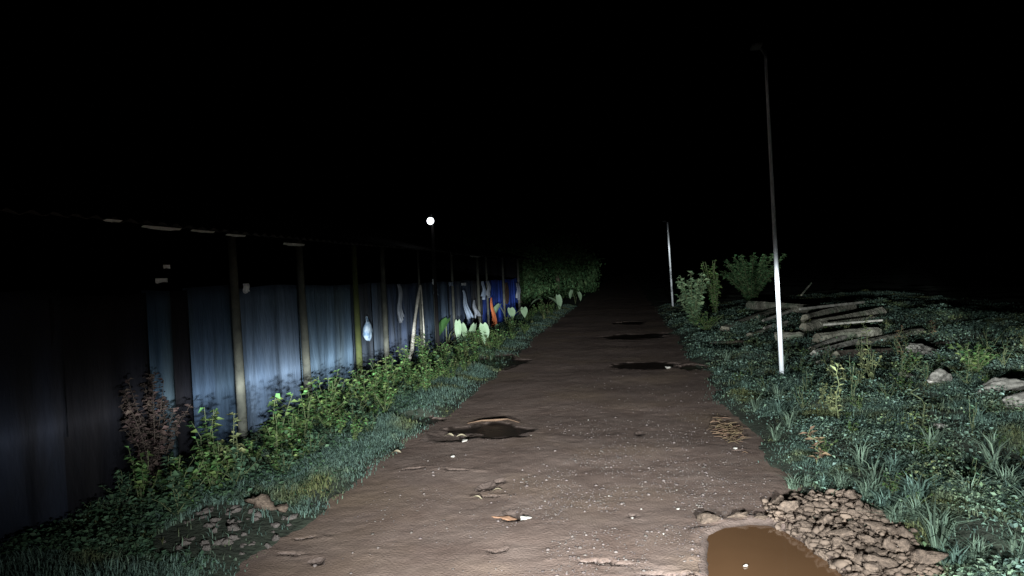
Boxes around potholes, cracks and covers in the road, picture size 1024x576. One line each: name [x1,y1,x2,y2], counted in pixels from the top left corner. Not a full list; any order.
pothole [590,332,672,340]
pothole [698,517,847,576]
pothole [439,421,539,439]
pothole [606,361,684,370]
